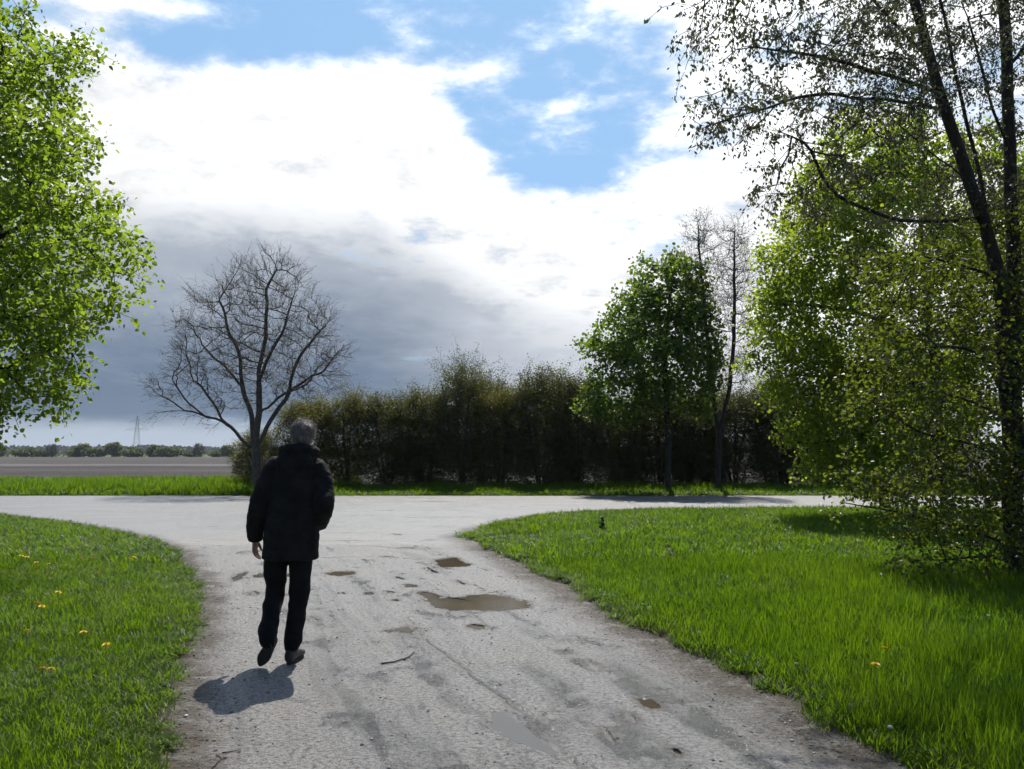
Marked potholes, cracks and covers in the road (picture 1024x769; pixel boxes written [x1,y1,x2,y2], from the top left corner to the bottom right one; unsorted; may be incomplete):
pothole [410,590,539,613]
pothole [428,556,478,568]
pothole [377,624,429,642]
pothole [629,695,671,712]
crack [404,619,592,769]
pothole [480,707,578,761]
